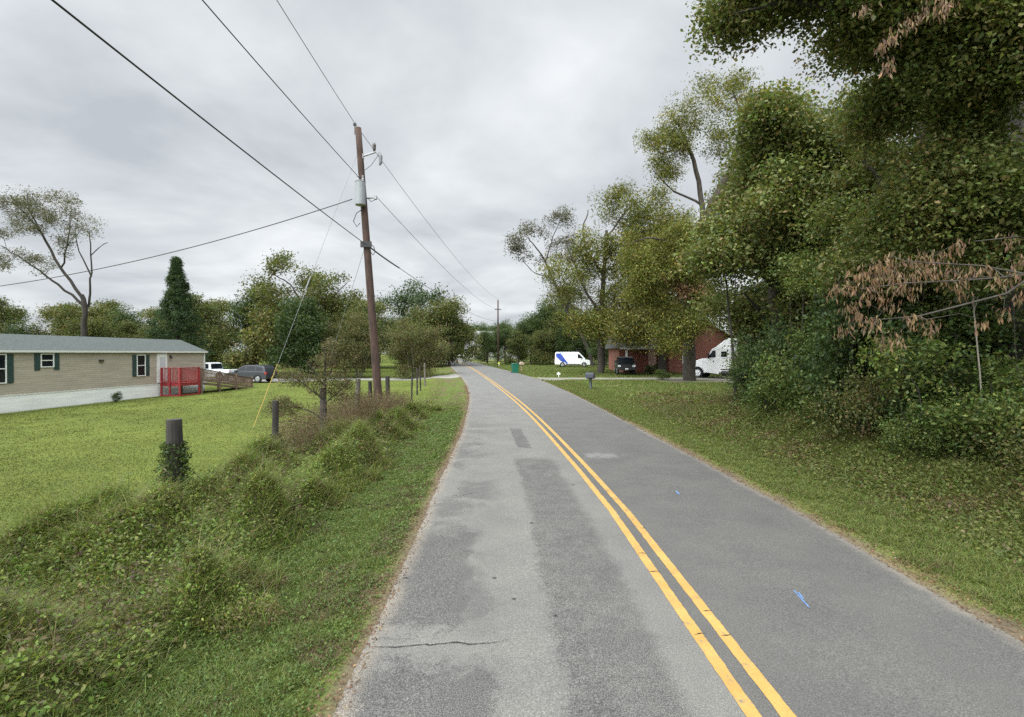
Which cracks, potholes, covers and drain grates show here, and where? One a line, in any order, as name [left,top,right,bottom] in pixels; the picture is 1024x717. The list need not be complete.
crack [370,640,503,648]
